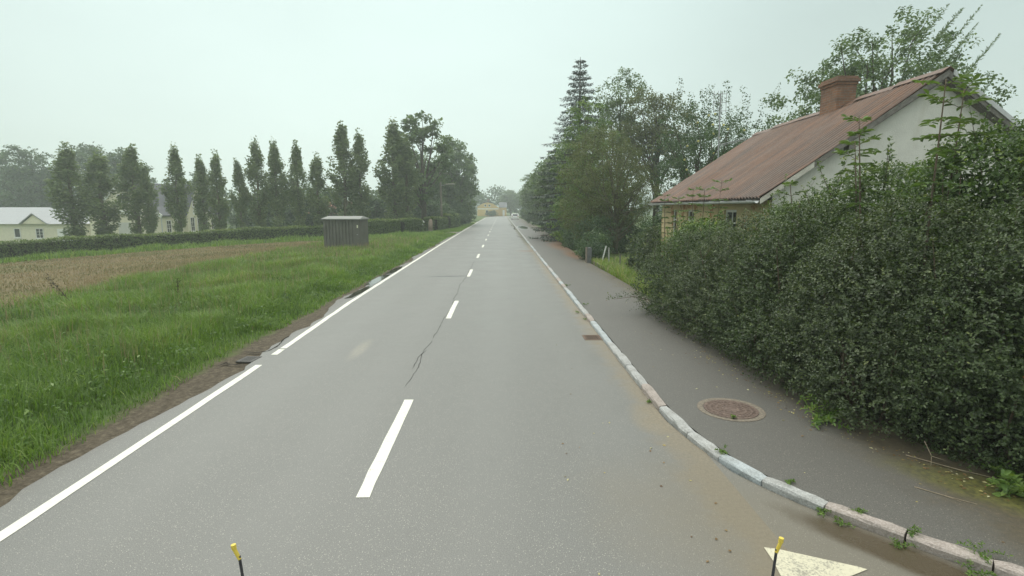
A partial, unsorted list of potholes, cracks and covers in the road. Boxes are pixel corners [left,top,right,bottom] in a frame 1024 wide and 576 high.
manhole cover [697,398,766,422]
